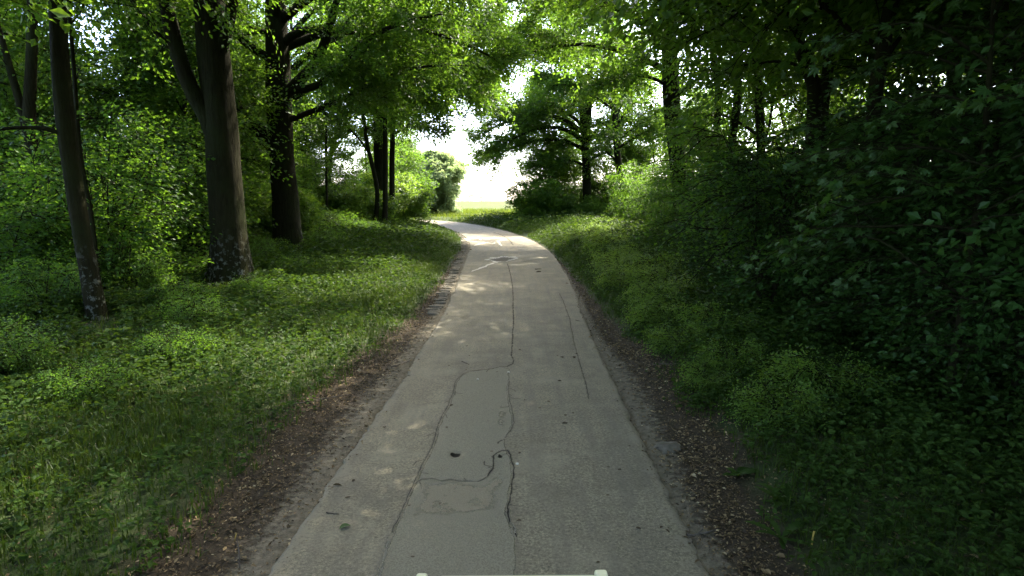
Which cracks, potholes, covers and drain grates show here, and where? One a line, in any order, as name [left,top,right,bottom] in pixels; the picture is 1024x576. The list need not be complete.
crack [415,360,521,537]
crack [550,281,589,399]
